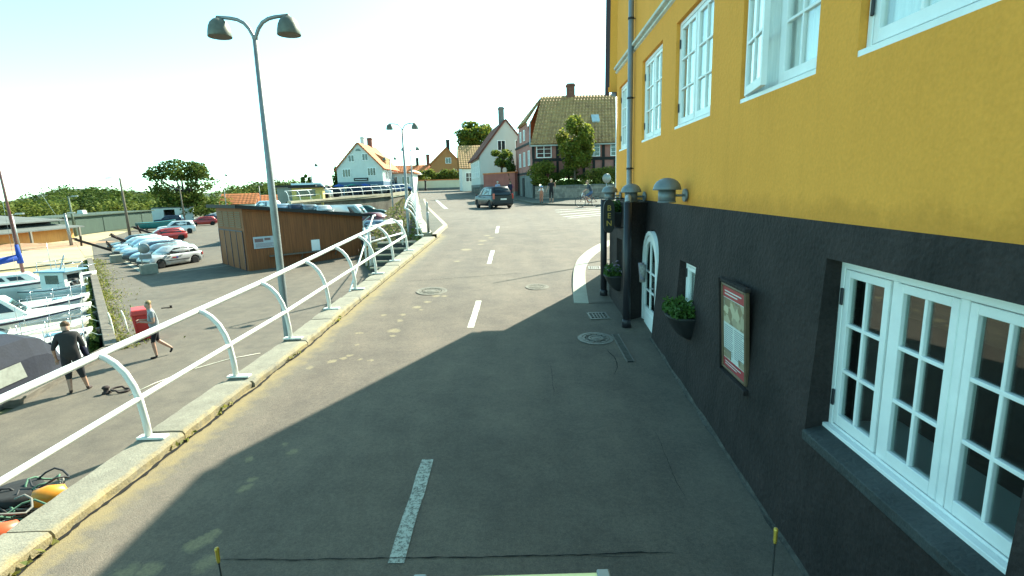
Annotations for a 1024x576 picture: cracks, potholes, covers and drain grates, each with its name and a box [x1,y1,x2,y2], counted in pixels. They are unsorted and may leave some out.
manhole cover [578,332,614,345]
drain grate [587,312,610,320]
manhole cover [416,287,447,295]
